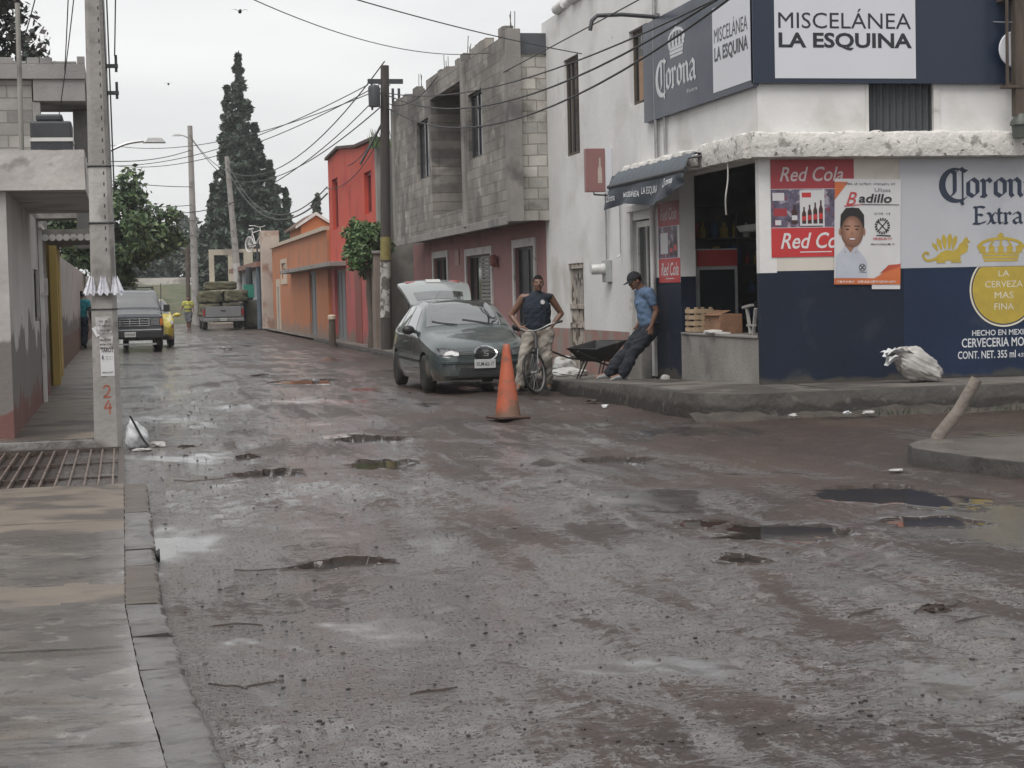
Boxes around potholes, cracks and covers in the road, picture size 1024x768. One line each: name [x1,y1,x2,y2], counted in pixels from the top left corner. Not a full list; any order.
pothole [257,378,346,386]
pothole [327,434,425,444]
pothole [576,456,657,465]
pothole [920,603,951,614]
pothole [698,523,863,546]
pothole [795,483,1007,513]
pothole [224,467,306,479]
pothole [673,519,734,530]
drain grate [0,446,125,489]
pothole [874,515,1000,529]
pothole [274,556,401,572]
pothole [714,552,776,566]
